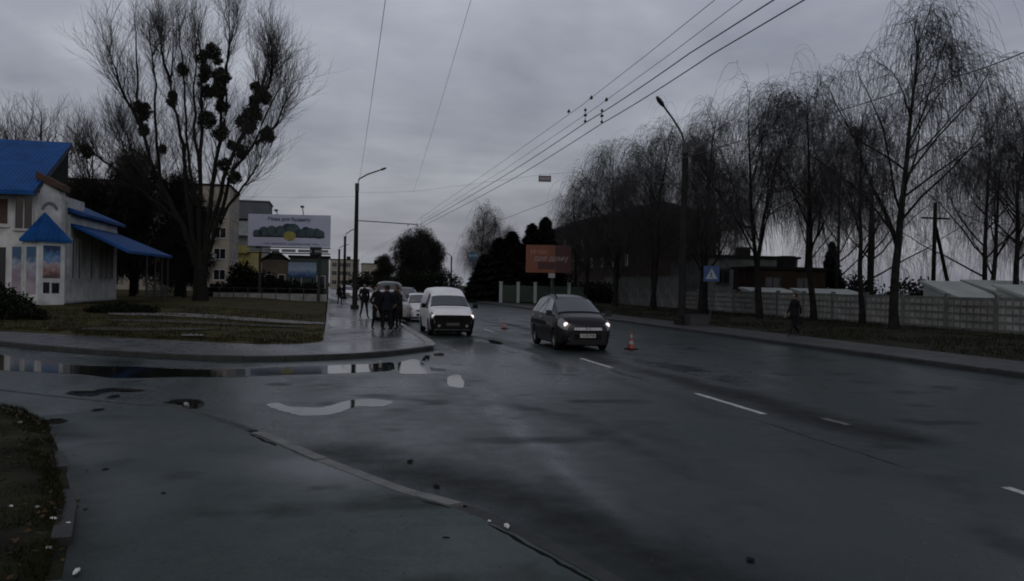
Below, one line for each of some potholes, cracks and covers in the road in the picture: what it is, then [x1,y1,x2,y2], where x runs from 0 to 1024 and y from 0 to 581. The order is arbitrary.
pothole [65,388,146,396]
pothole [163,399,205,409]
